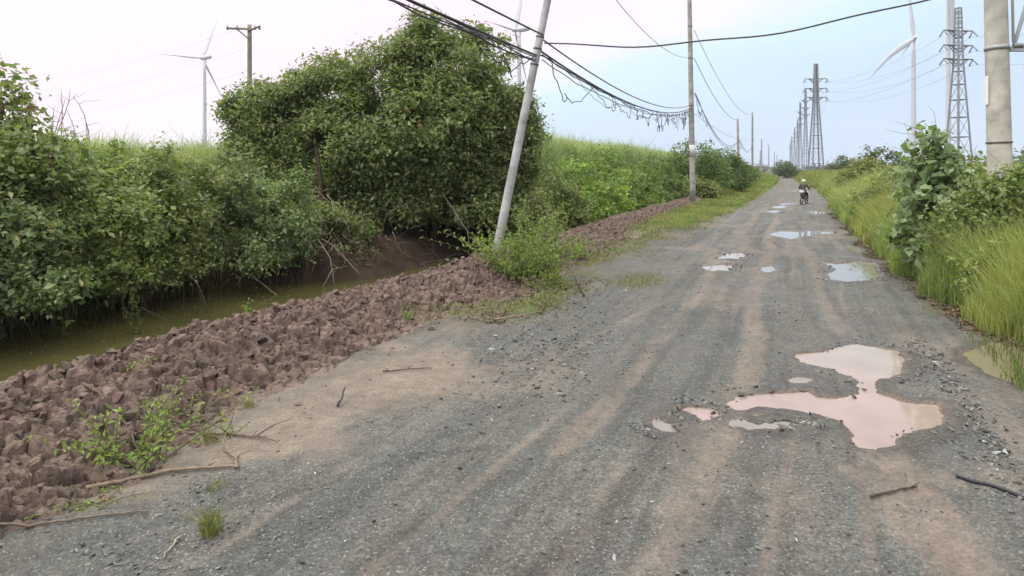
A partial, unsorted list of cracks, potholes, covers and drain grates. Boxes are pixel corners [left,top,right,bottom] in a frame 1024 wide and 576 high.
pothole [709,342,967,457]
pothole [655,400,731,429]
pothole [750,264,787,274]
pothole [761,229,844,240]
pothole [709,251,755,260]
pothole [634,409,701,440]
pothole [812,260,892,284]
pothole [691,263,742,273]
